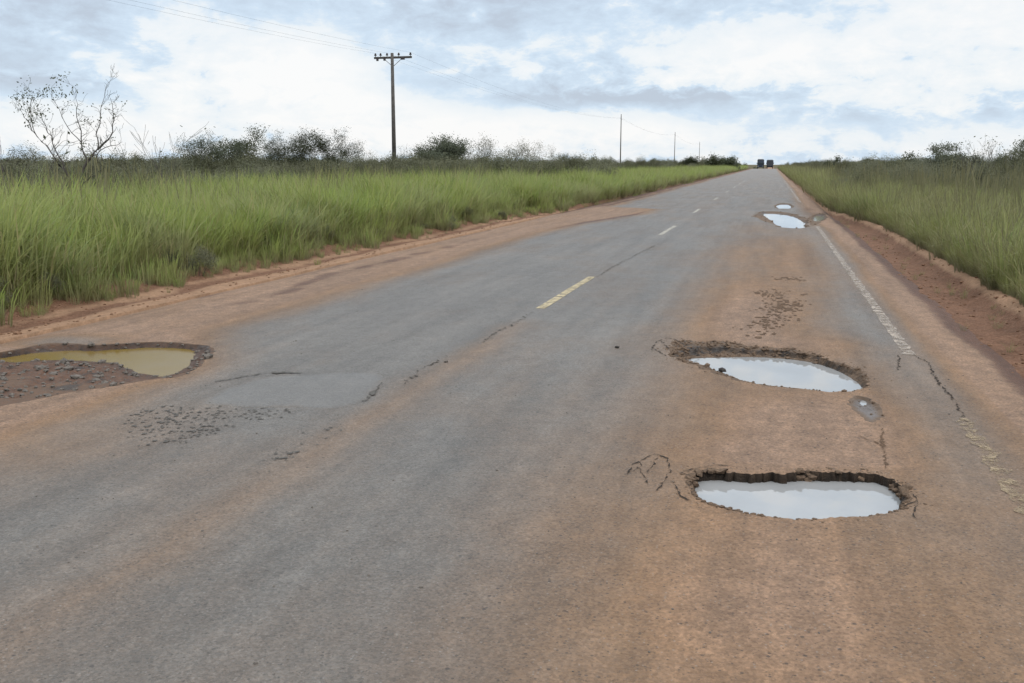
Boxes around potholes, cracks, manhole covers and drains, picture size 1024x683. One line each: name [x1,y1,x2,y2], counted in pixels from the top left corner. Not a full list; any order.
pothole [654,338,892,393]
crack [861,428,888,467]
crack [897,354,967,422]
crack [627,455,730,500]
pothole [806,213,828,226]
pothole [847,395,885,423]
